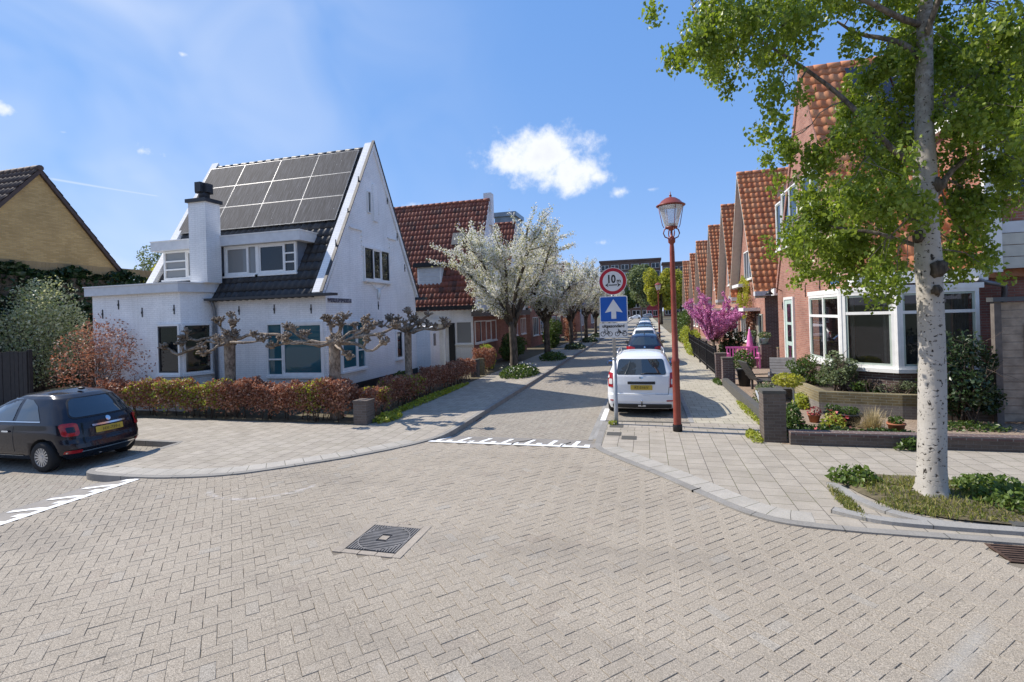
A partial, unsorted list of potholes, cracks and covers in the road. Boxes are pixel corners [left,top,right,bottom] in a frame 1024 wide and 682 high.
drain grate [984,543,1024,564]
